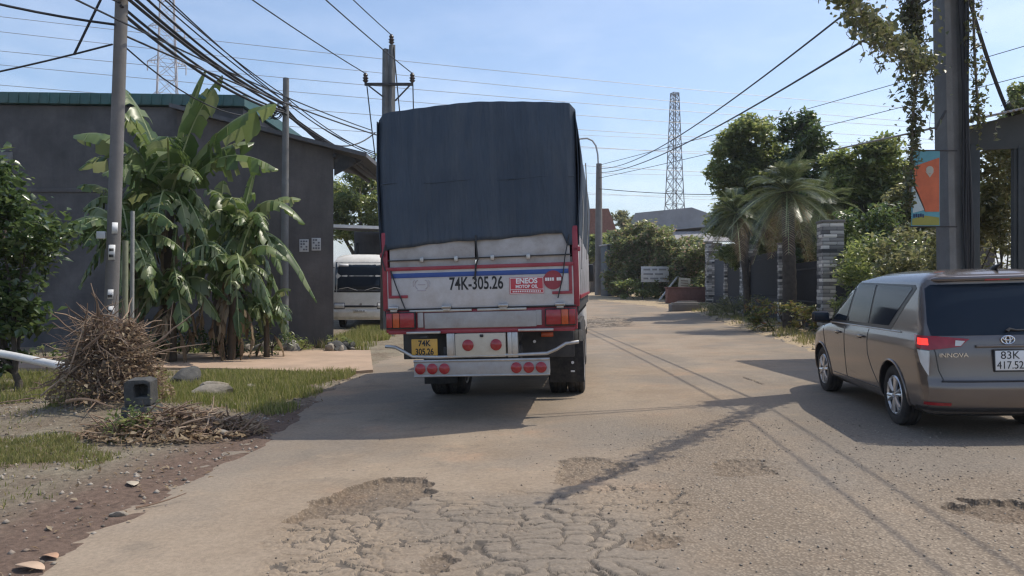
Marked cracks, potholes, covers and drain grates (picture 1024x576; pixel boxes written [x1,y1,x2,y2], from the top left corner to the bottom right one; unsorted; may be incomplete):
crack [255,482,714,576]
pothole [550,457,641,486]
pothole [707,458,786,478]
pothole [940,497,1024,525]
pothole [282,477,439,524]
